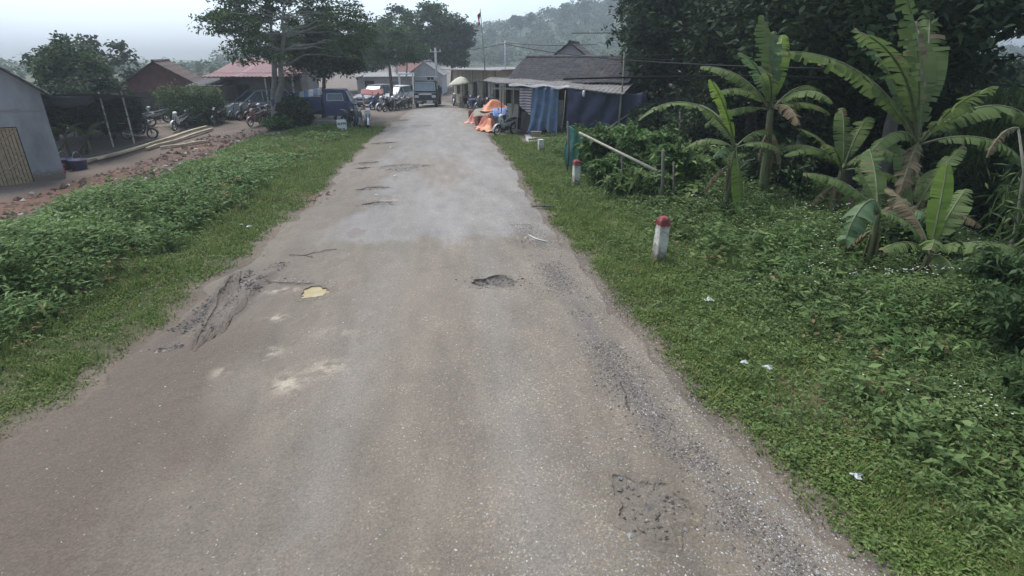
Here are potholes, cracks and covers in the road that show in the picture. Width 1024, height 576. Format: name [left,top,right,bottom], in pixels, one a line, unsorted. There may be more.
crack [619,382,630,411]
pothole [465,273,524,290]
pothole [600,467,707,555]
pothole [193,272,248,352]
pothole [375,163,437,173]
crack [289,249,336,258]
